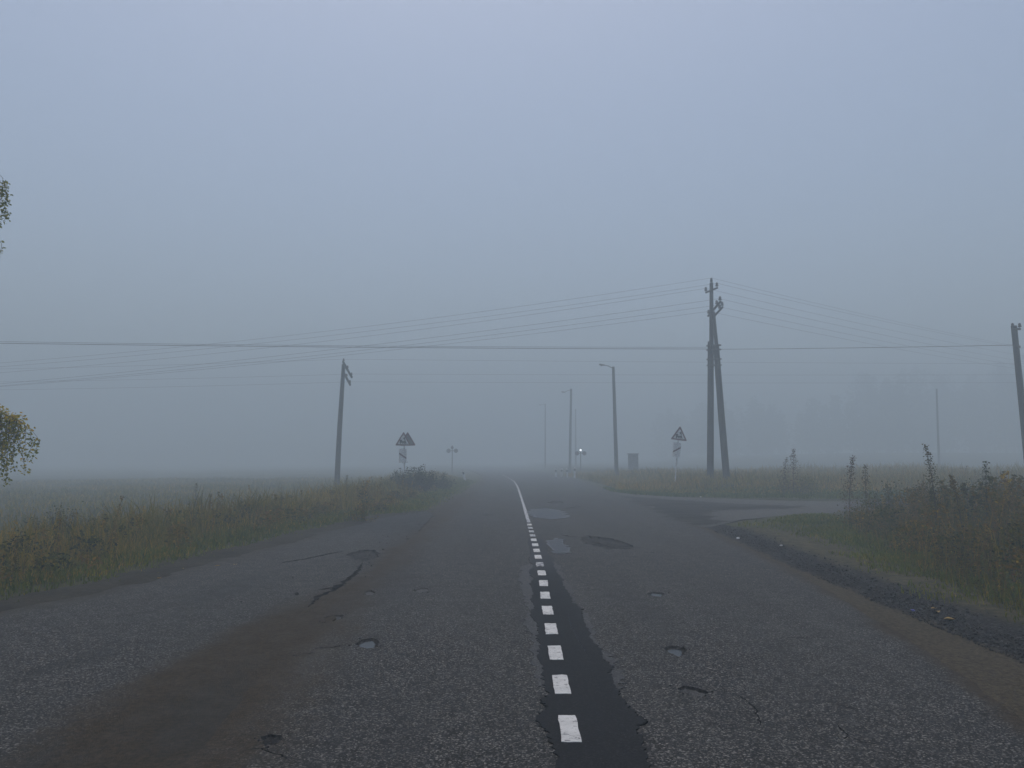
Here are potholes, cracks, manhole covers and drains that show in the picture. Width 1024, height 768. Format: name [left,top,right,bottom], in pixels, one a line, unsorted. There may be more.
crack [283,551,363,607]
pothole [346,550,380,562]
pothole [356,638,380,649]
pothole [581,535,634,550]
pothole [261,734,282,745]
crack [836,705,882,745]
crack [730,694,762,727]
pothole [678,686,709,697]
pothole [664,646,687,656]
